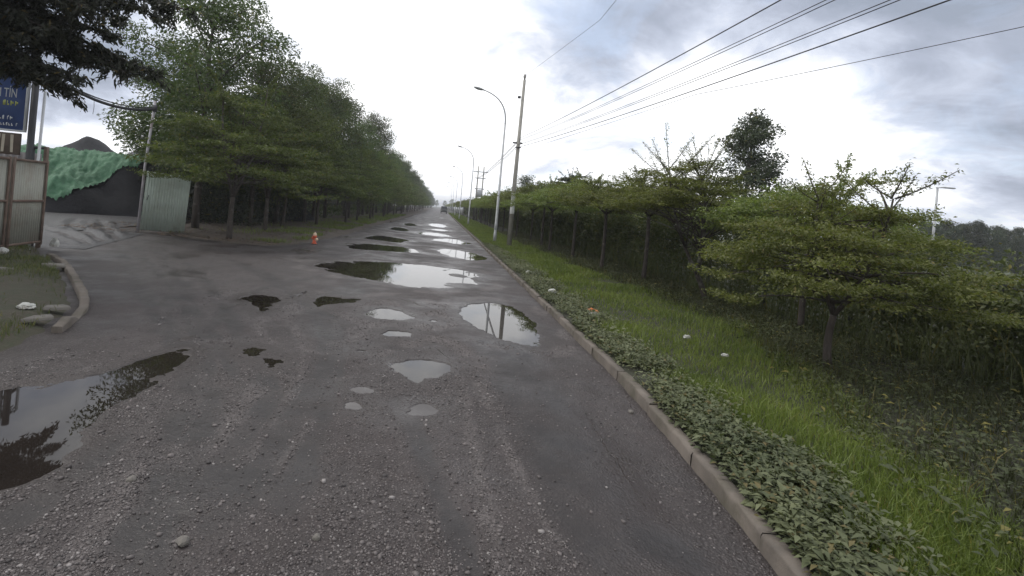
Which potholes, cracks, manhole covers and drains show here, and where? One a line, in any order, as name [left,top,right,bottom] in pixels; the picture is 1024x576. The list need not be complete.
pothole [388,358,454,384]
pothole [436,248,490,261]
pothole [239,346,267,356]
pothole [406,402,440,416]
pothole [363,308,417,320]
pothole [344,401,363,410]
pothole [240,294,282,313]
pothole [260,357,285,369]
pothole [0,347,195,491]
pothole [349,386,375,394]
pothole [312,295,362,307]
pothole [363,235,410,243]
